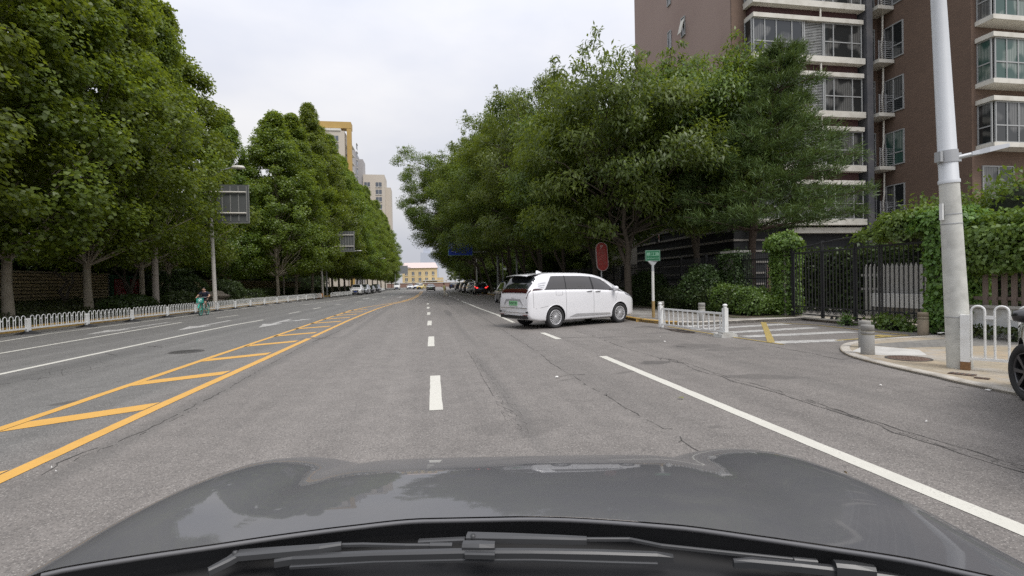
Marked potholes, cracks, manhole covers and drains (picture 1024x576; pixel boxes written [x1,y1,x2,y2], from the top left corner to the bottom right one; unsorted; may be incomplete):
crack [577,331,1024,472]
crack [473,311,699,451]
